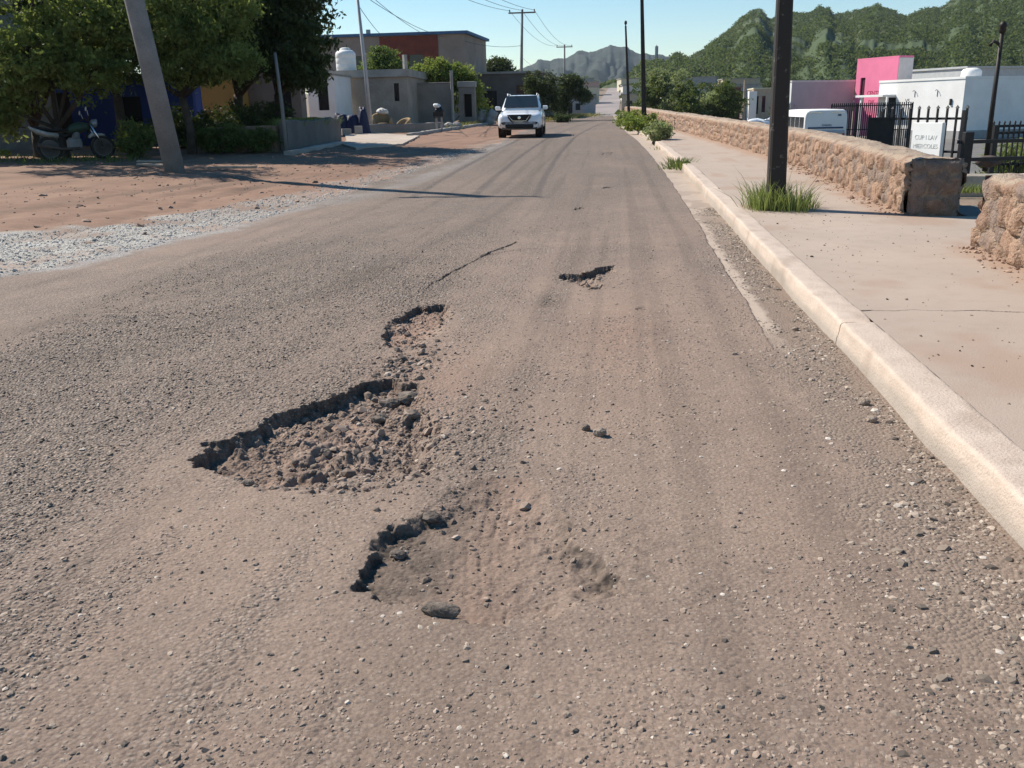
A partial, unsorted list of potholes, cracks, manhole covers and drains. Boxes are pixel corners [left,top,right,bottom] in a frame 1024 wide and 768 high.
pothole [558,265,617,290]
pothole [380,304,457,349]
pothole [188,378,454,495]
crack [425,241,519,287]
pothole [349,475,628,627]
